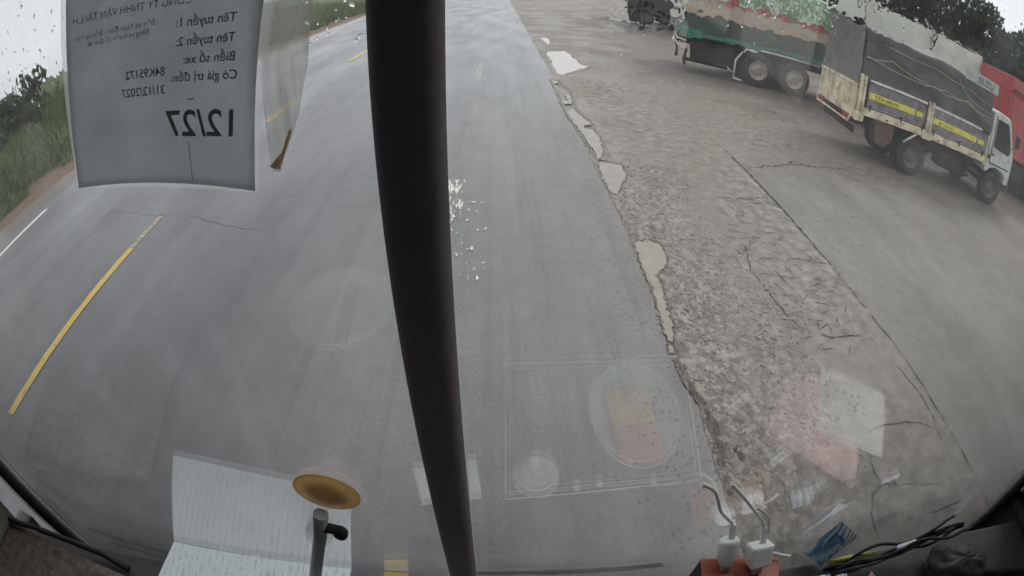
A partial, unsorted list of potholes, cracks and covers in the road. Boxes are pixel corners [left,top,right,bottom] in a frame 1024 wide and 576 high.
crack [853,450,928,510]
crack [719,195,872,355]
pothole [631,237,678,353]
crack [749,161,846,170]
crack [866,365,953,459]
pothole [595,158,630,196]
pothole [541,50,588,76]
pothole [549,79,612,160]
crack [104,211,266,231]
